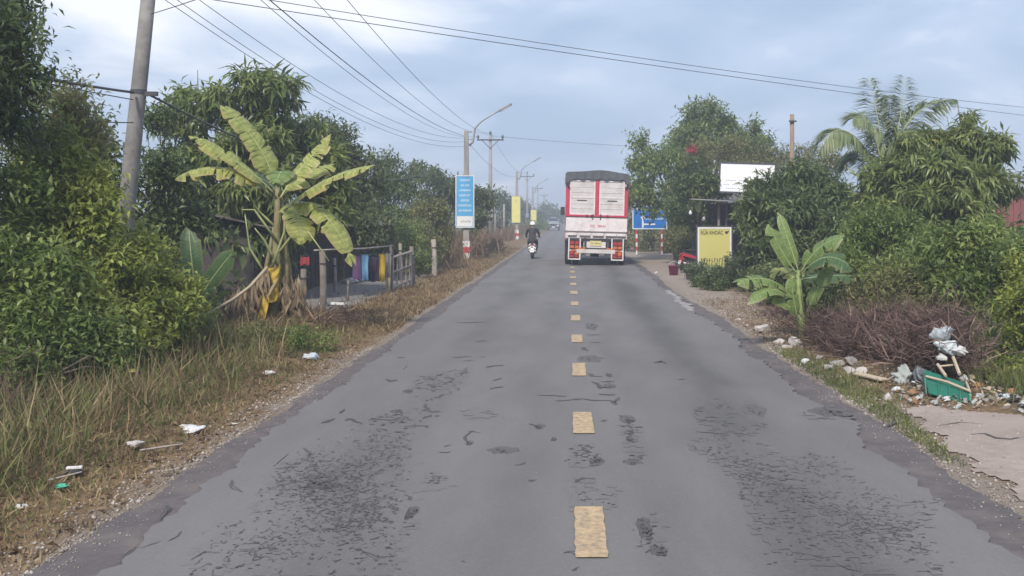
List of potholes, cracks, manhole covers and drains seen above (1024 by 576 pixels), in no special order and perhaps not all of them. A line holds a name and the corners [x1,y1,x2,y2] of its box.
crack [941,422,1021,439]
crack [542,373,620,422]
crack [118,340,504,576]
